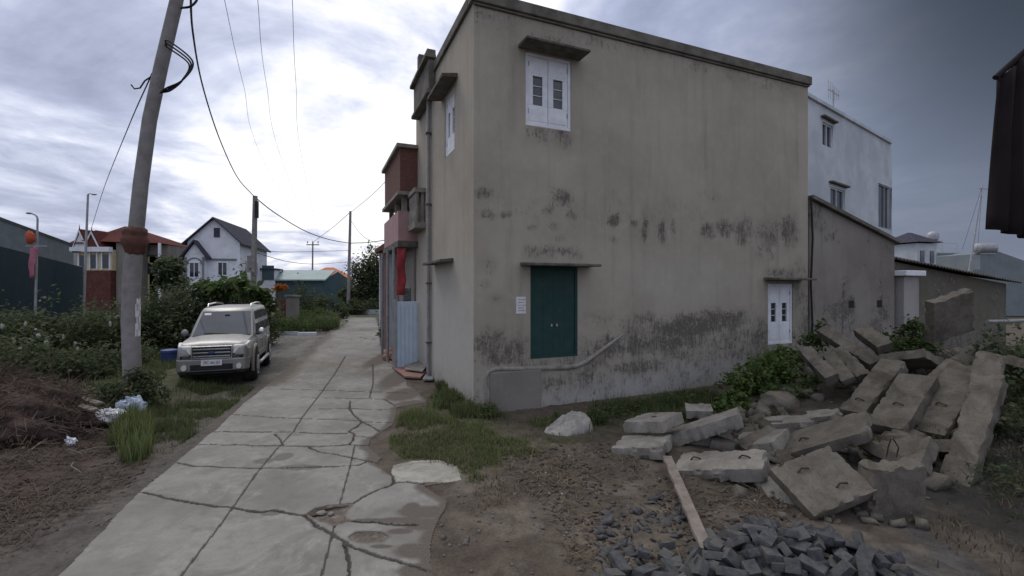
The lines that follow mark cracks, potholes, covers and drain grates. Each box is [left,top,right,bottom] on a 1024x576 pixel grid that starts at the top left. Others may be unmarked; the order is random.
pothole [306,504,352,526]
pothole [349,532,388,542]
crack [143,475,426,576]
crack [178,389,395,470]
